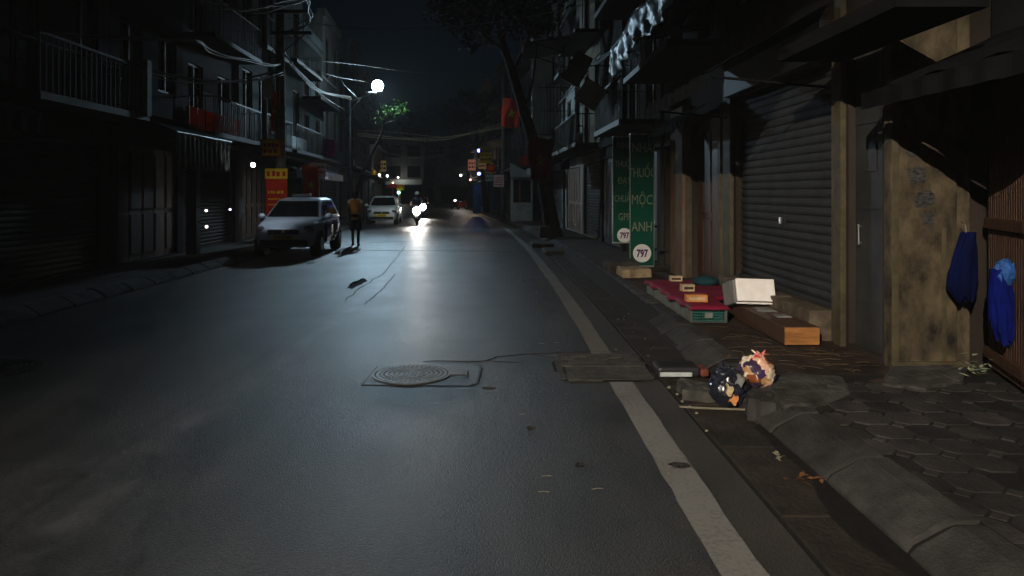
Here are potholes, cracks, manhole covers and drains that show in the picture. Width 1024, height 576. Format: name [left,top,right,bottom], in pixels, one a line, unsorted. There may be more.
crack [345,241,520,305]
manhole cover [361,364,483,386]
manhole cover [0,358,45,377]
crack [423,351,634,363]
